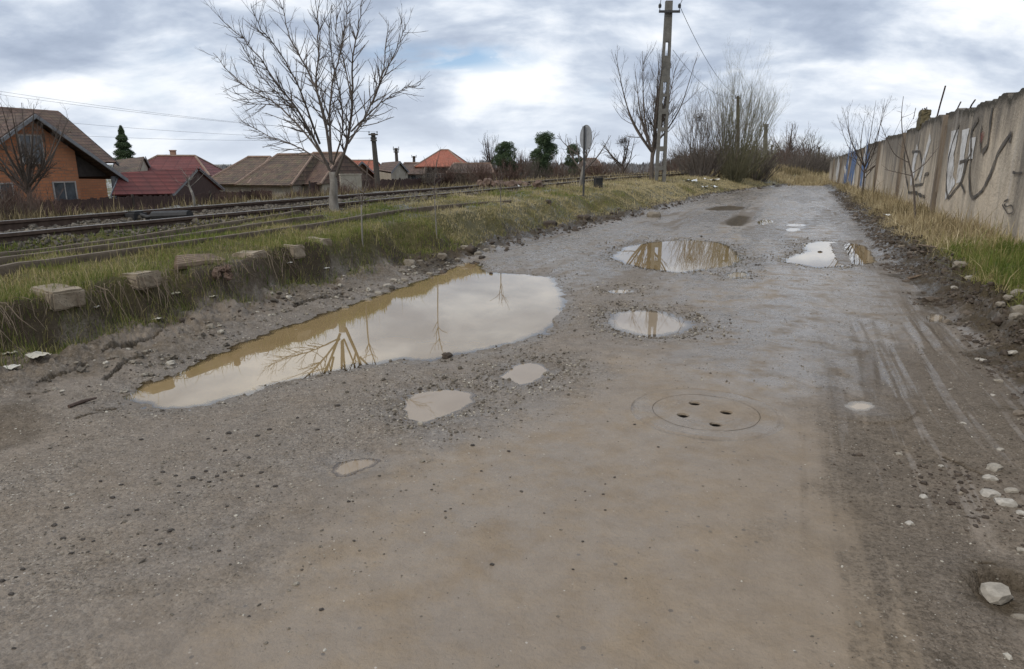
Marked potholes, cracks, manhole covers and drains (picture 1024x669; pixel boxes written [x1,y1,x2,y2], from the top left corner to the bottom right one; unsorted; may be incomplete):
pothole [725,215,751,226]
manhole cover [631,388,785,441]
pothole [592,235,779,274]
pothole [33,252,595,429]
pothole [759,236,896,269]
pothole [319,452,391,482]
pothole [836,398,886,414]
pothole [564,300,753,345]
